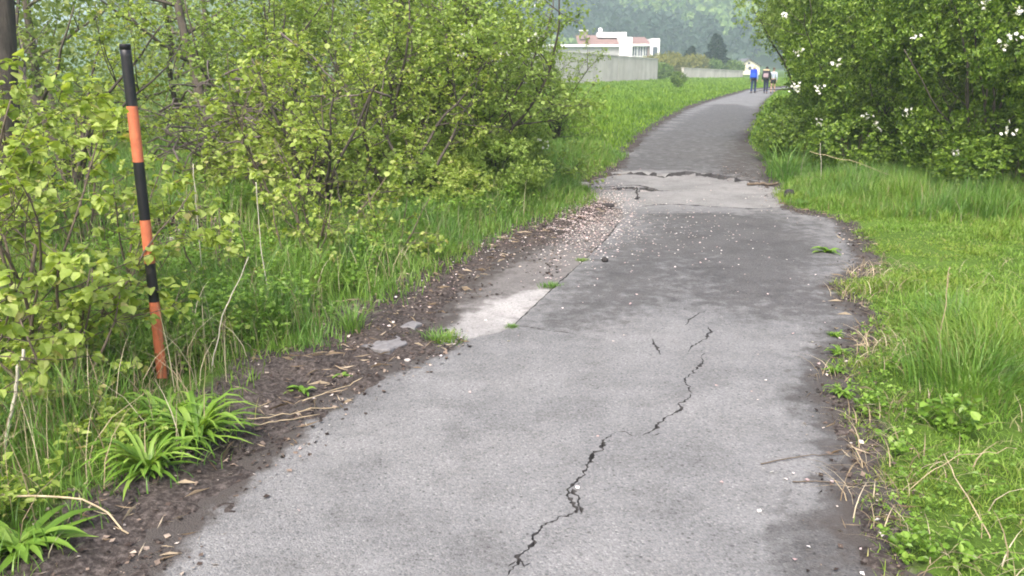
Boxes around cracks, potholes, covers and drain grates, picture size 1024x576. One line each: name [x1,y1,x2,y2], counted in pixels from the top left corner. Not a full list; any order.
crack [609,171,773,200]
crack [507,311,713,576]
